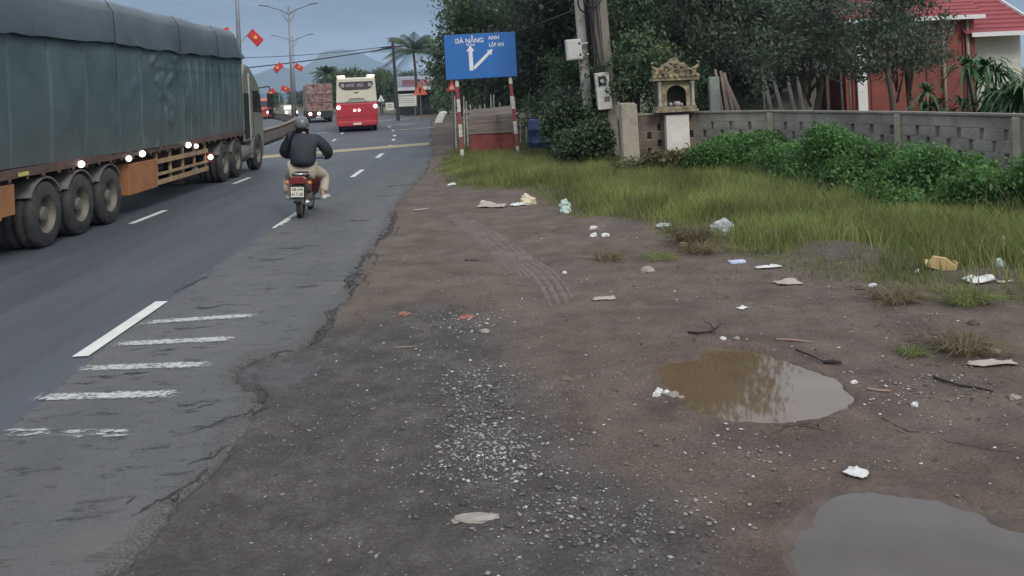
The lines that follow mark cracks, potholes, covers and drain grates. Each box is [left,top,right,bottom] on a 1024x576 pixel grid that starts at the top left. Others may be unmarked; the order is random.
crack [125,185,400,517]
pothole [774,485,1024,576]
pothole [653,345,856,423]
